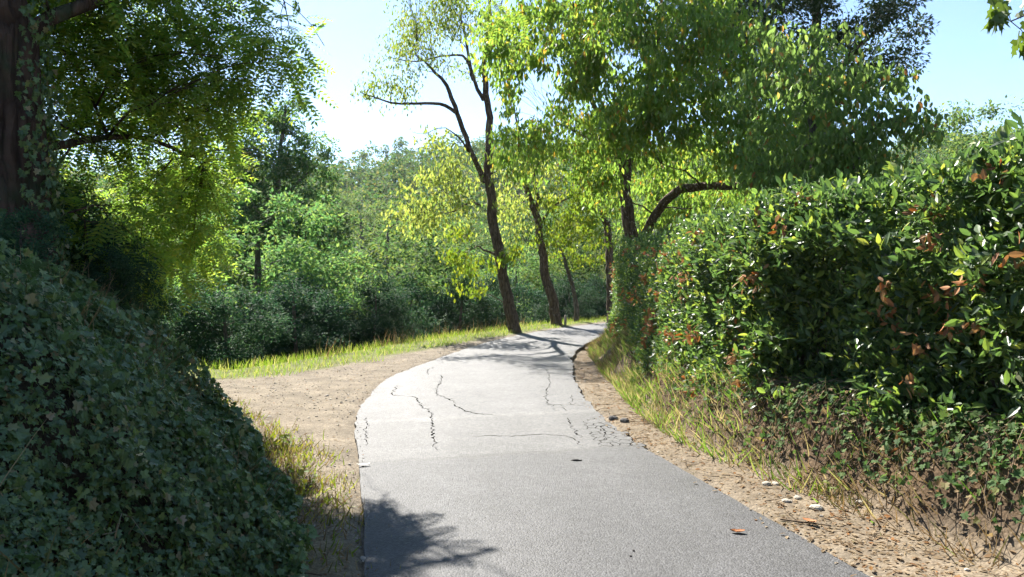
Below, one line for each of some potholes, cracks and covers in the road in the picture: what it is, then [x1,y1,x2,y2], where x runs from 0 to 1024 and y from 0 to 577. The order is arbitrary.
crack [391,367,492,447]
crack [477,370,647,448]
